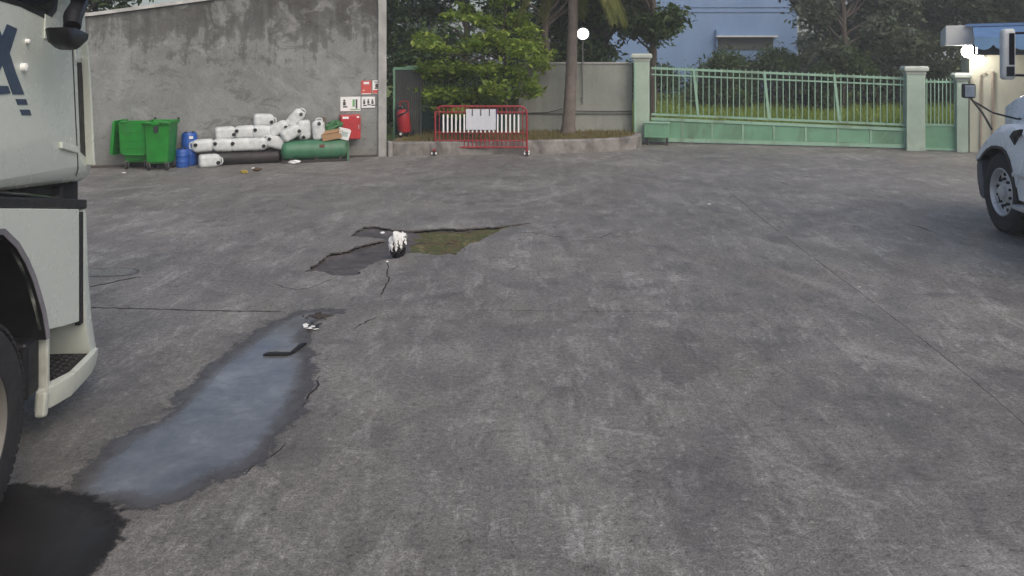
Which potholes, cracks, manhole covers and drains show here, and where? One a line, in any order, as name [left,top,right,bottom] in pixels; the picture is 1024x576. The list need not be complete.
pothole [305,223,529,276]
